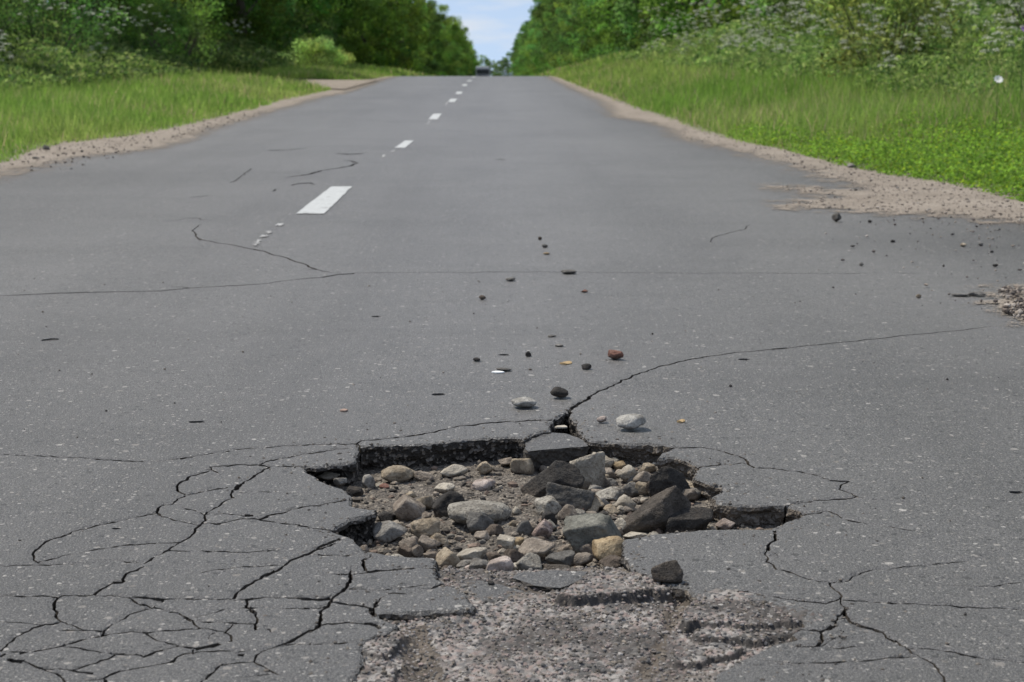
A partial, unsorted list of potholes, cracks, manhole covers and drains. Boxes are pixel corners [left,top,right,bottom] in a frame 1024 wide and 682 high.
crack [683,447,1024,682]
crack [270,153,362,192]
crack [5,218,917,296]
crack [568,326,991,420]
pothole [304,413,824,682]
crack [0,419,552,682]
